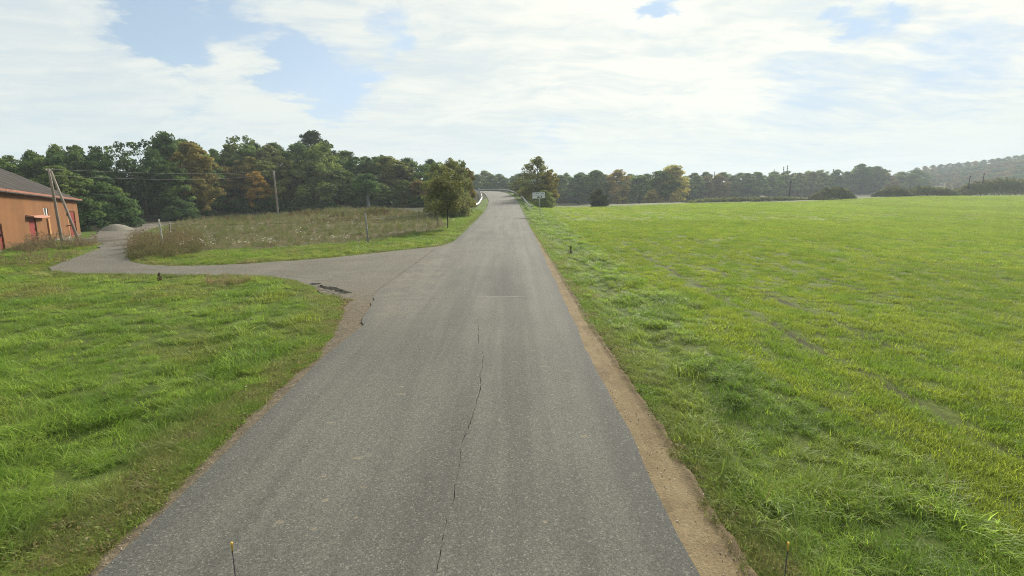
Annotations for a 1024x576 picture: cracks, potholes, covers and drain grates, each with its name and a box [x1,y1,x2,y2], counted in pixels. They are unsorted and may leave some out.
pothole [316,285,352,295]
crack [437,329,483,569]
